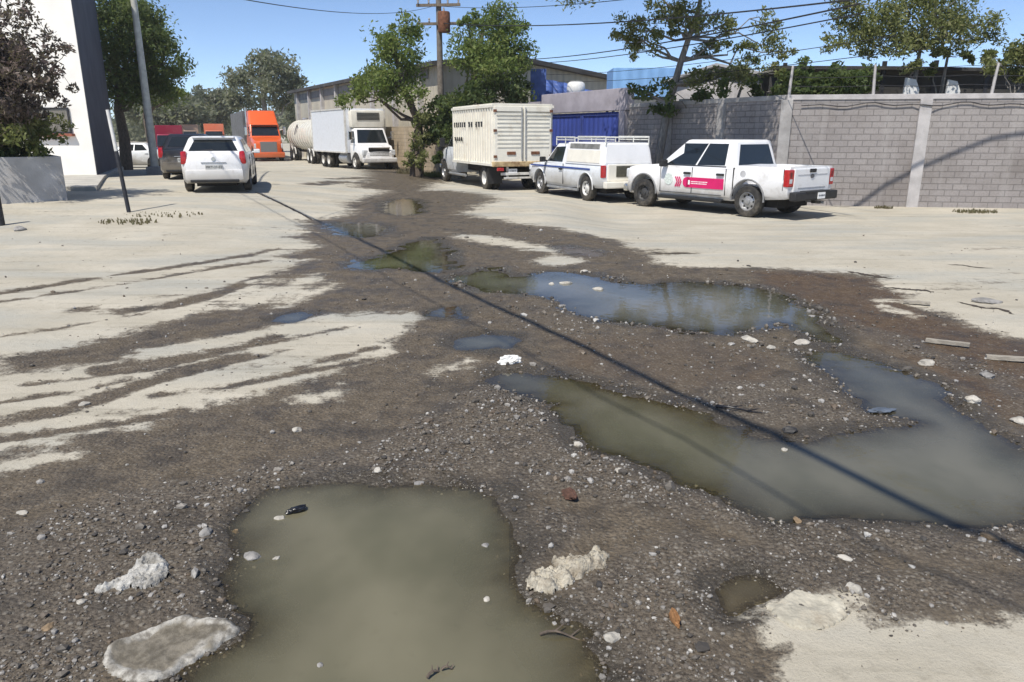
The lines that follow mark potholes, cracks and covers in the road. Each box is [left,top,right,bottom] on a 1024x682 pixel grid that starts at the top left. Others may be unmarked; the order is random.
pothole [381,198,439,216]
pothole [193,485,596,682]
pothole [499,352,1024,526]
pothole [718,580,764,612]
pothole [454,271,827,340]
pothole [459,337,514,348]
pothole [354,241,449,271]
